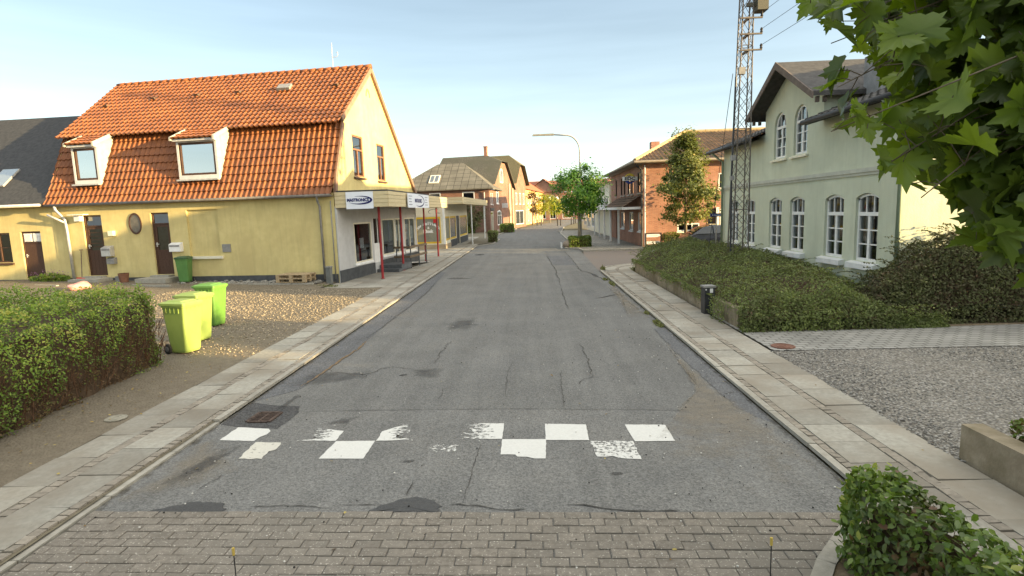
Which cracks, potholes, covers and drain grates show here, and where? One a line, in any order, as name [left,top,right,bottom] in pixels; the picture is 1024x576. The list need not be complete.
crack [301,341,448,386]
drain grate [245,411,283,423]
crack [546,251,616,306]
crack [457,447,521,510]
